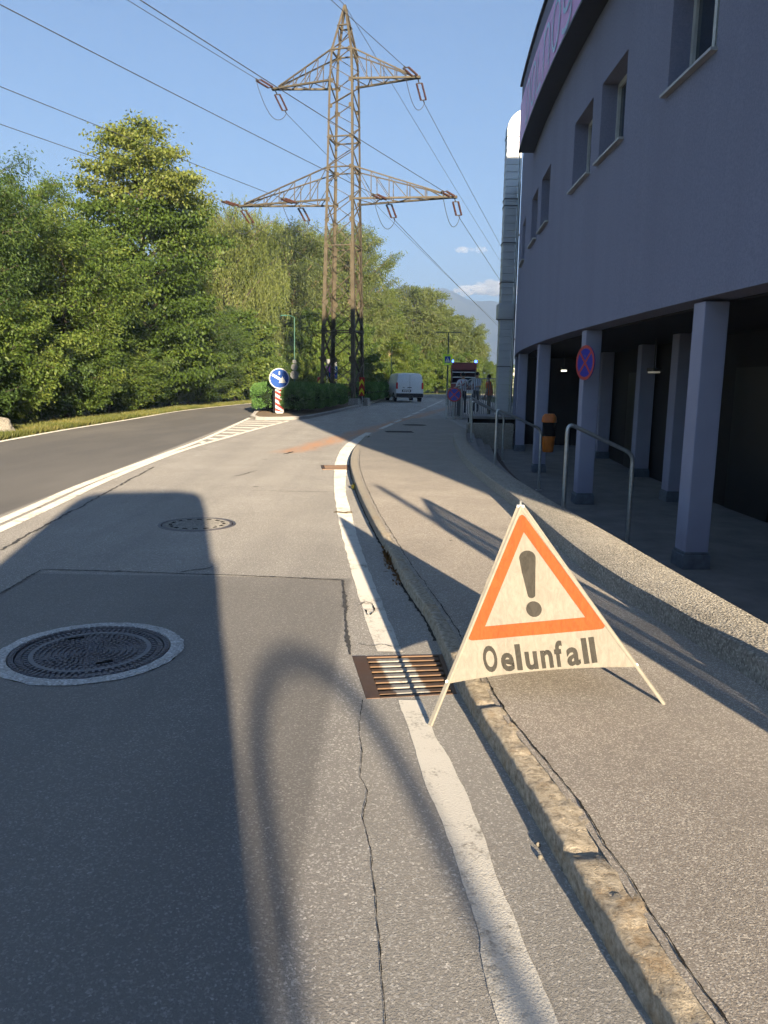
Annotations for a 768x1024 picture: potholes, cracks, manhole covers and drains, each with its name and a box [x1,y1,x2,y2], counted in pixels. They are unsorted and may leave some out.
drain grate [352,654,457,699]
manhole cover [158,517,236,532]
manhole cover [0,622,184,686]
